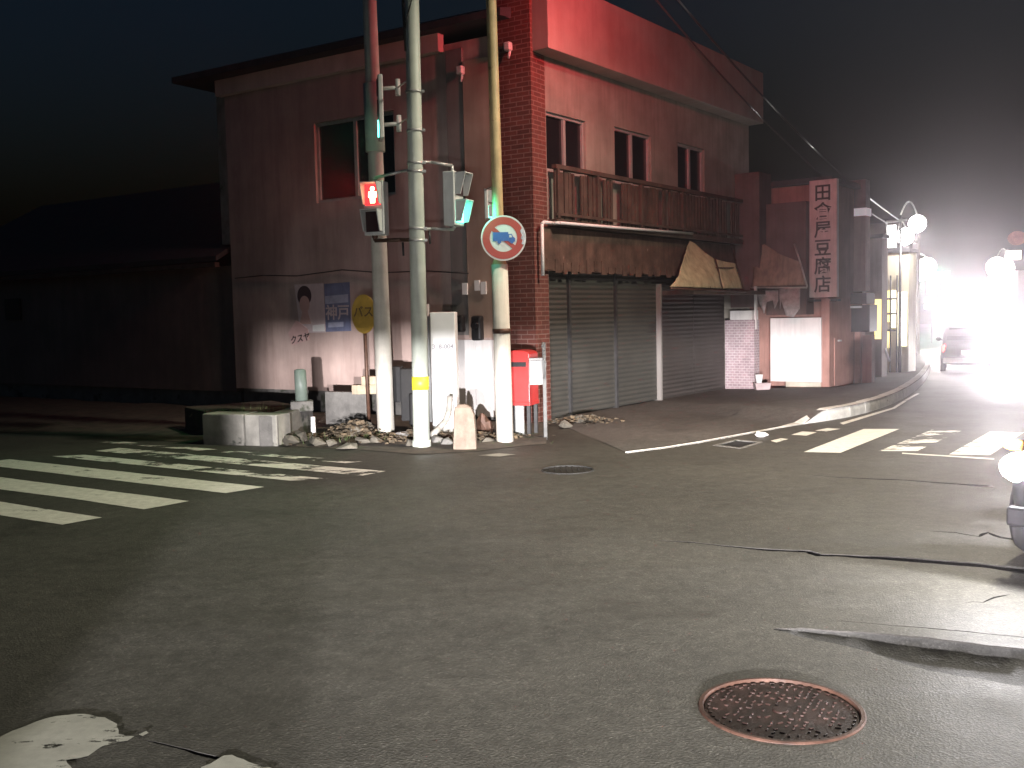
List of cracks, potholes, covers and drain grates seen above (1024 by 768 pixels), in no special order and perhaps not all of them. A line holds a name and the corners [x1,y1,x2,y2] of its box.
drain grate [713,439,761,449]
manhole cover [541,465,594,474]
crack [145,740,220,760]
crack [817,475,994,487]
crack [847,621,1024,638]
crack [655,531,1024,574]
manhole cover [698,678,867,745]
